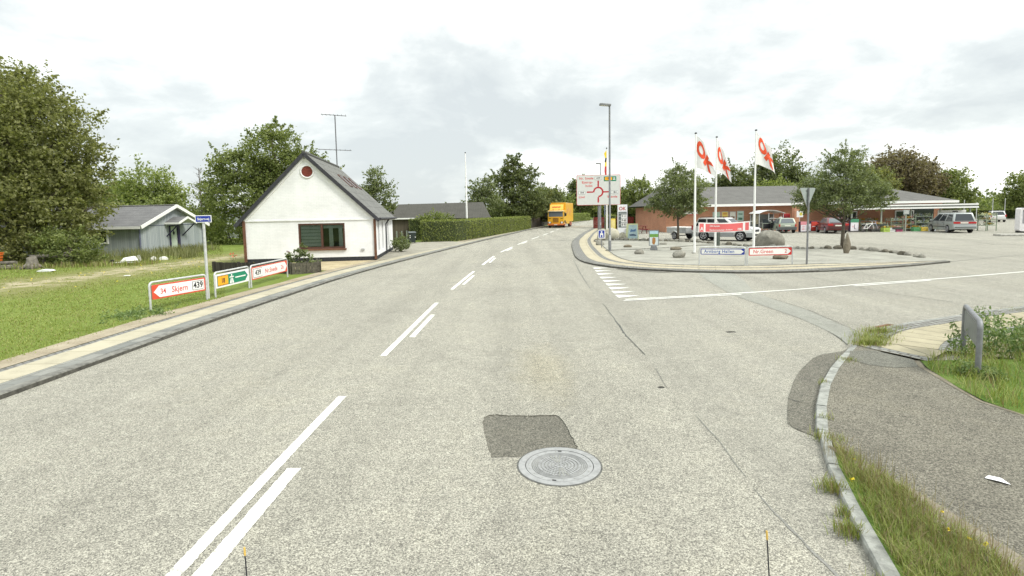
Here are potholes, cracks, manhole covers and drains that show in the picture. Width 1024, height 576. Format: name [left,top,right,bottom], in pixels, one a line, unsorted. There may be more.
manhole cover [517,447,603,487]
